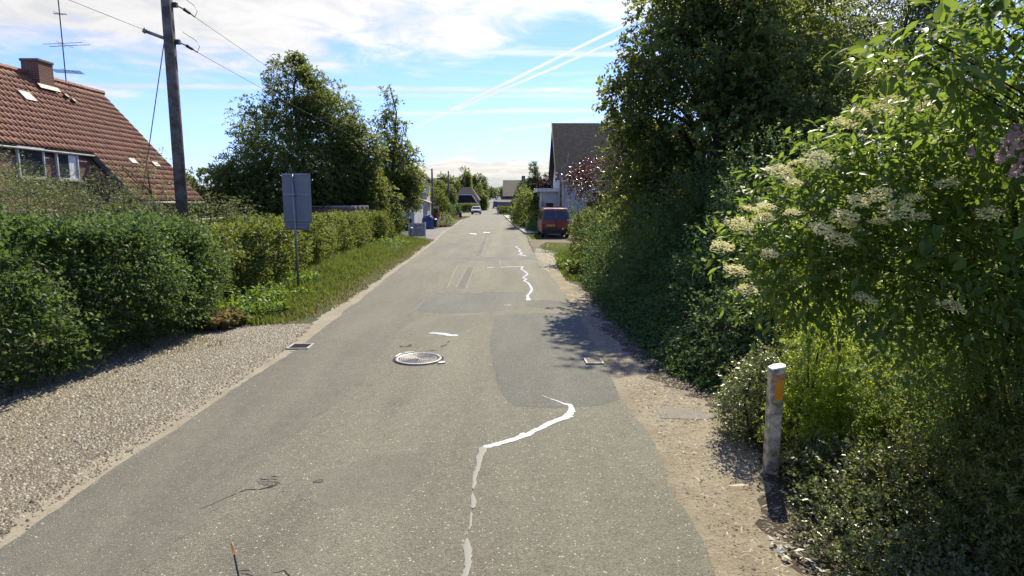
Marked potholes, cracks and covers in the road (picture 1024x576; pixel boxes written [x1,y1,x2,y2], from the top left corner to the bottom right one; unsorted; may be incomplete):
manhole cover [392,351,446,366]
crack [237,476,283,493]
